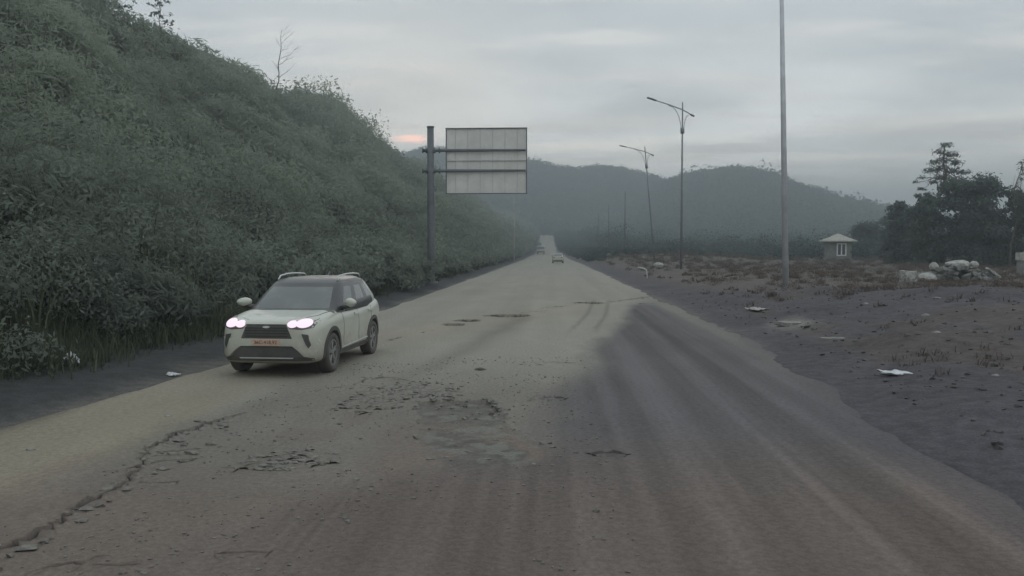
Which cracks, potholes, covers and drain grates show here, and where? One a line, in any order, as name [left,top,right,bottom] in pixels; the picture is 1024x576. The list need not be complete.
pothole [405,397,559,475]
crack [0,412,344,576]
